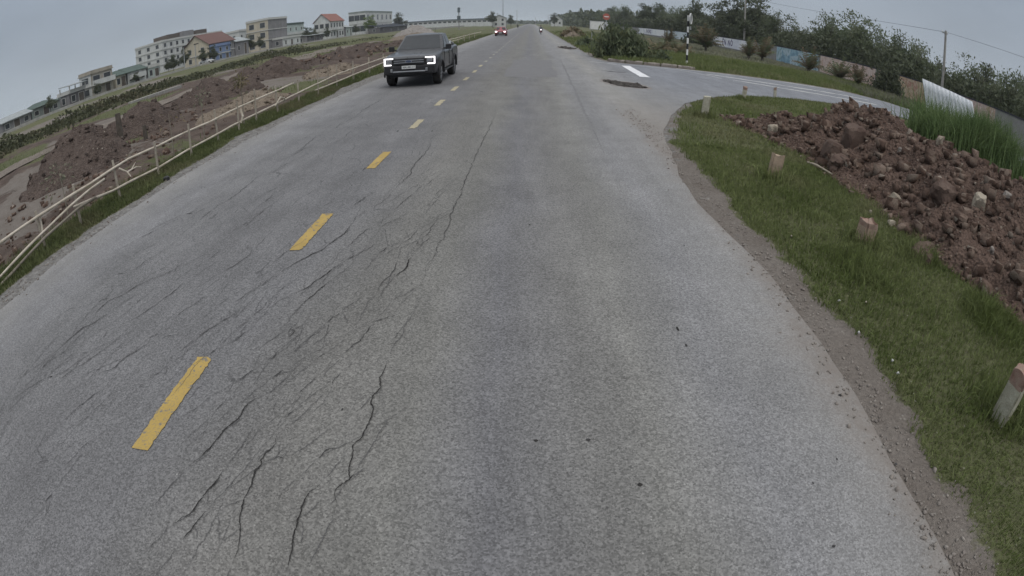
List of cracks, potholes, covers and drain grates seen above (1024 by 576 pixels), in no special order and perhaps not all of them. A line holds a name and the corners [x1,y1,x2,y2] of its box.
crack [0,101,495,576]
pothole [600,79,653,89]
